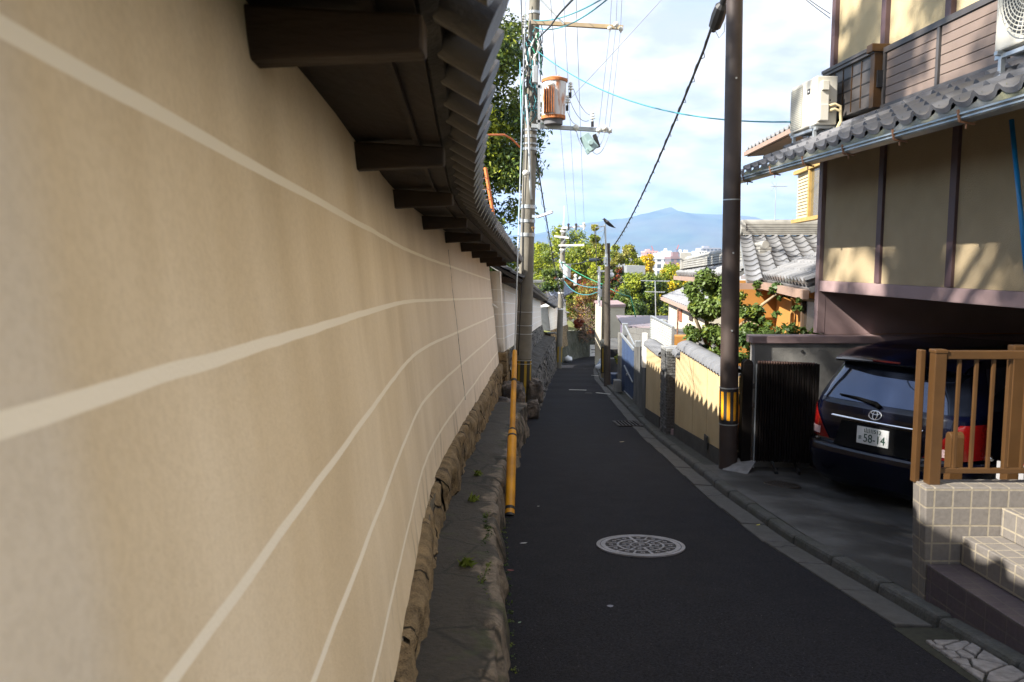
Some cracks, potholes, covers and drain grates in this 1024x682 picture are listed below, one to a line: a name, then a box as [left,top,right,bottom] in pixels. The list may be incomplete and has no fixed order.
manhole cover [596,535,685,558]
